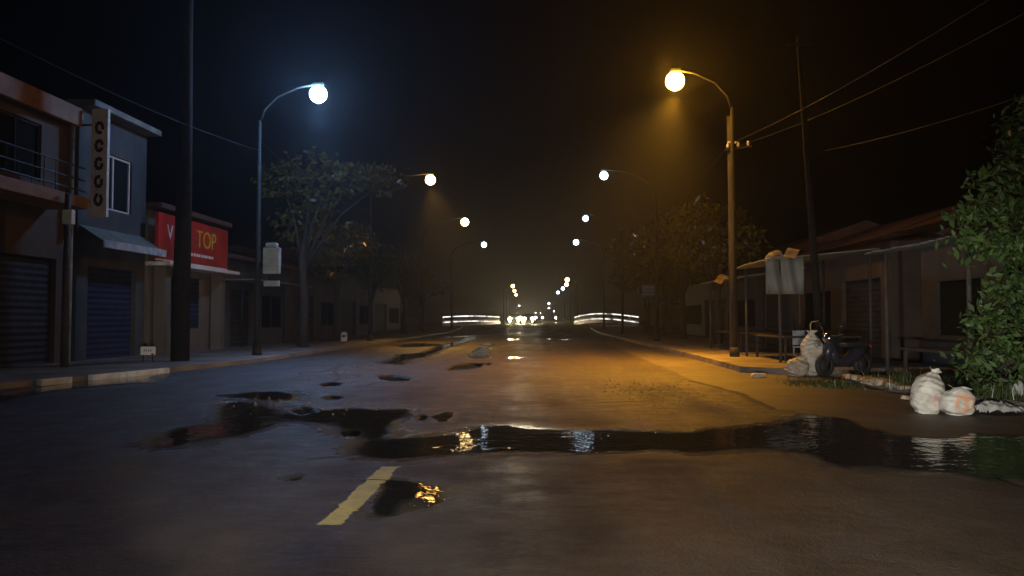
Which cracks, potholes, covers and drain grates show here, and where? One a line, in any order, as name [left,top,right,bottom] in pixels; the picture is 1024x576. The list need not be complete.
pothole [276,473,310,482]
pothole [410,414,432,422]
pothole [446,362,493,370]
pothole [374,374,414,382]
